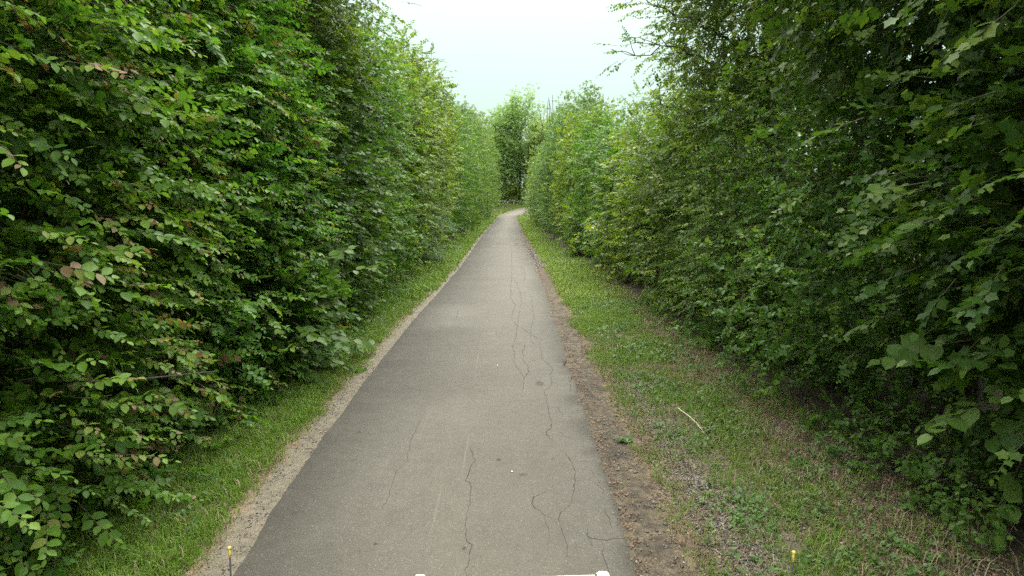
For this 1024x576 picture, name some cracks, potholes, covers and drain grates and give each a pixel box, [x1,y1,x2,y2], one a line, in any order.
crack [510,254,624,576]
crack [464,447,473,574]
